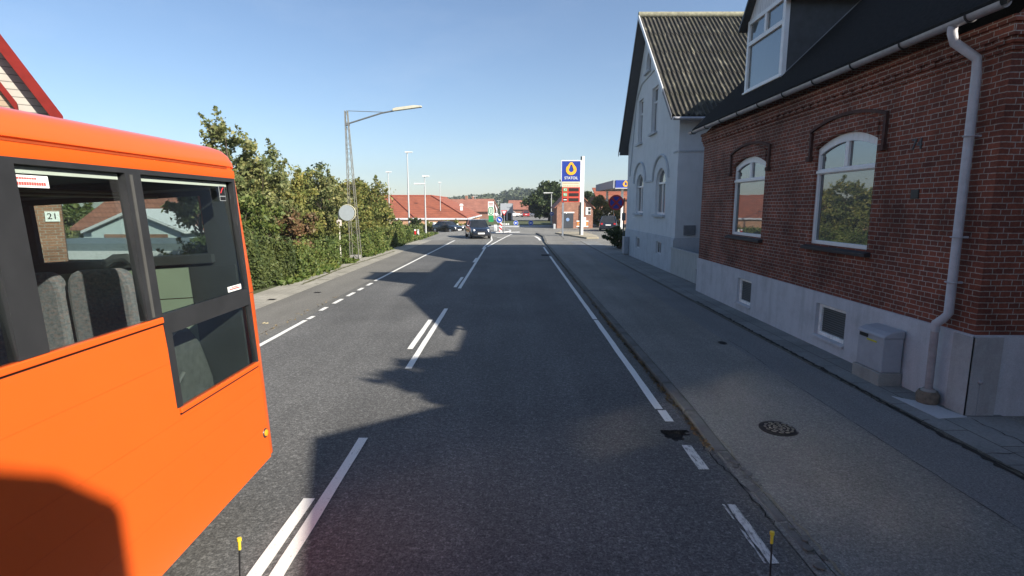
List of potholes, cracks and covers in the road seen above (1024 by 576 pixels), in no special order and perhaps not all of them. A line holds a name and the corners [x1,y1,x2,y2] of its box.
manhole cover [759,421,799,436]
pothole [660,430,690,441]
